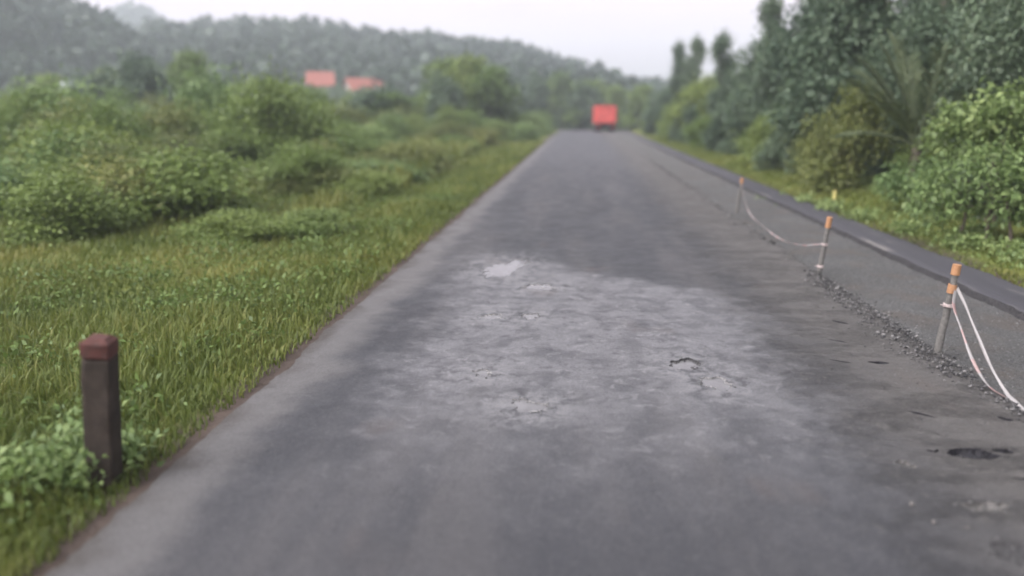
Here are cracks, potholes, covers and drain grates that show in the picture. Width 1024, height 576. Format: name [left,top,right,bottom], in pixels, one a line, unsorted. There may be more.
pothole [953,501,1013,513]
pothole [508,396,553,414]
pothole [519,282,560,290]
pothole [667,357,704,370]
pothole [479,259,532,279]
pothole [943,447,1009,461]
pothole [471,368,492,379]
